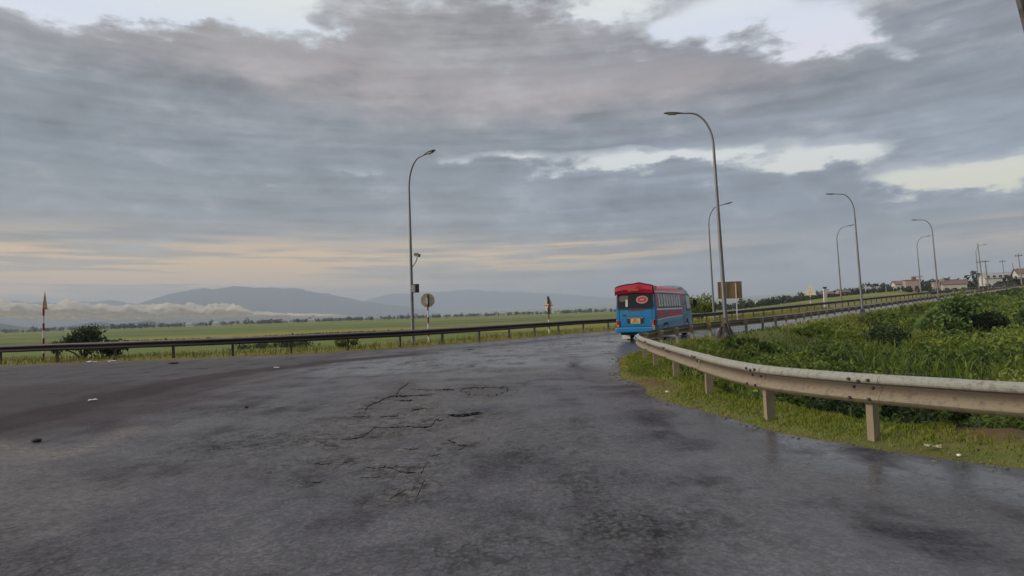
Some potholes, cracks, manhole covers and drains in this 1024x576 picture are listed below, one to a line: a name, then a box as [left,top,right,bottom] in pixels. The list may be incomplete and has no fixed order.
pothole [460,386,511,396]
crack [305,383,465,499]
